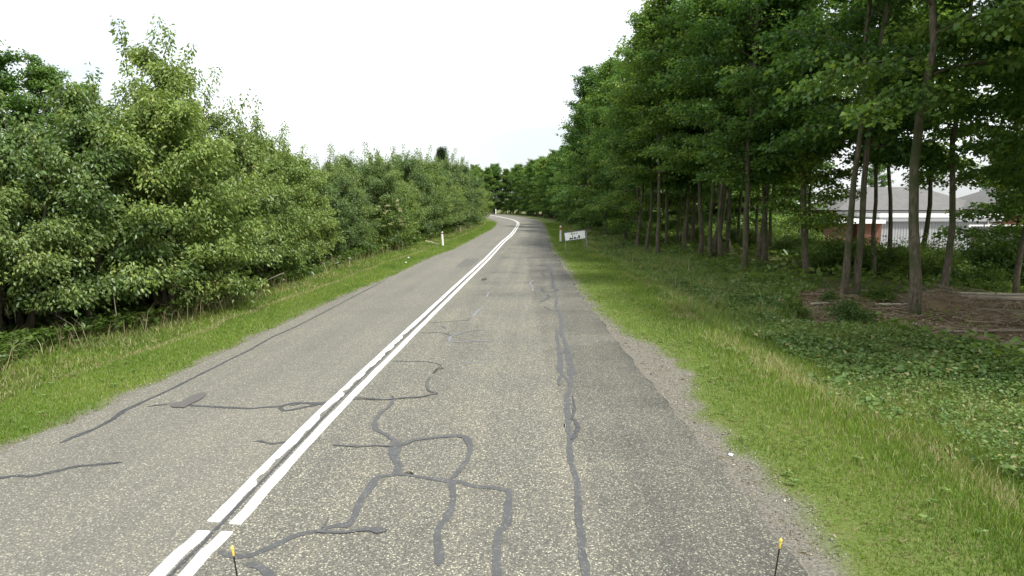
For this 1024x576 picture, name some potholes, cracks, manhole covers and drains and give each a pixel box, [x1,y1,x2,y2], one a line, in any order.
crack [419,287,502,342]
